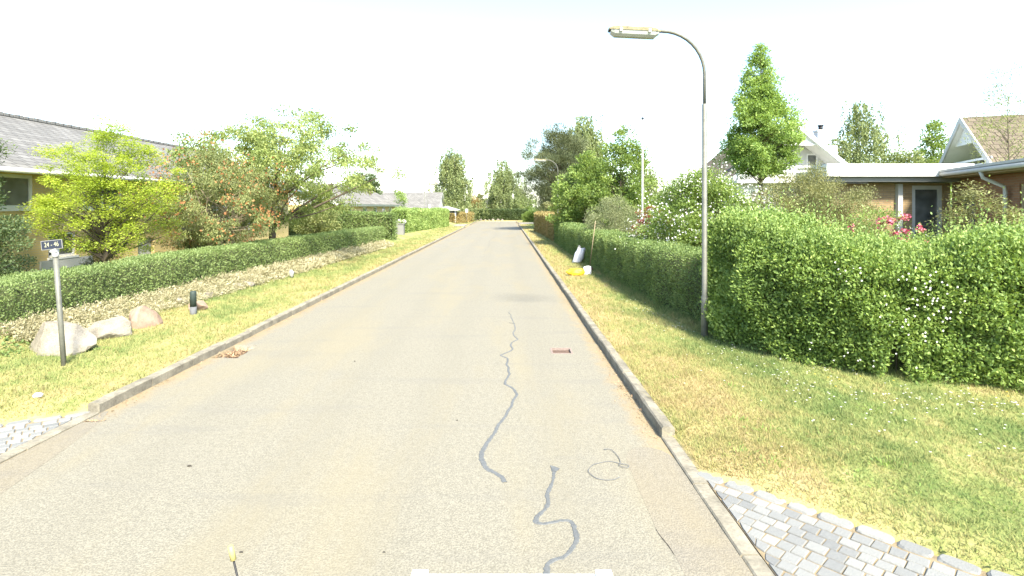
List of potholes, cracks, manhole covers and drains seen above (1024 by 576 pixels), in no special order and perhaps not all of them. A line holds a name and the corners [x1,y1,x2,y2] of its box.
crack [533,465,580,574]
